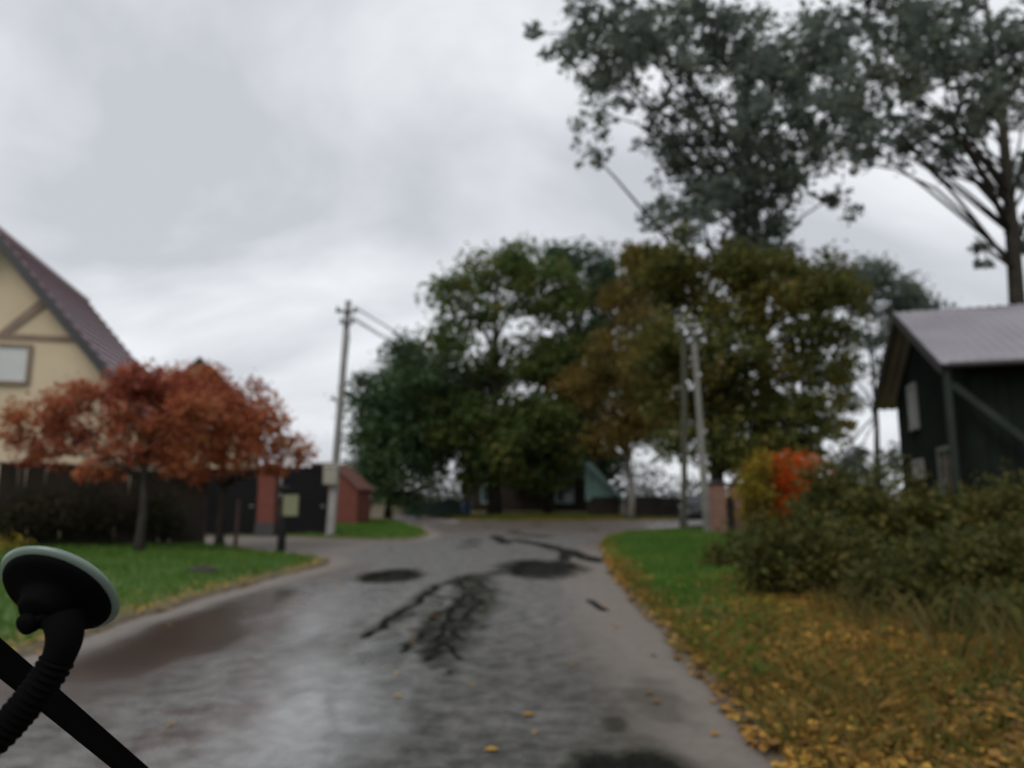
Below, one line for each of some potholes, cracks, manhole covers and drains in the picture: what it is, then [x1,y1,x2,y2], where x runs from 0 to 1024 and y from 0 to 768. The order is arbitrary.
pothole [360,569,421,583]
pothole [578,753,679,768]
crack [360,535,603,674]
pothole [500,560,578,577]
